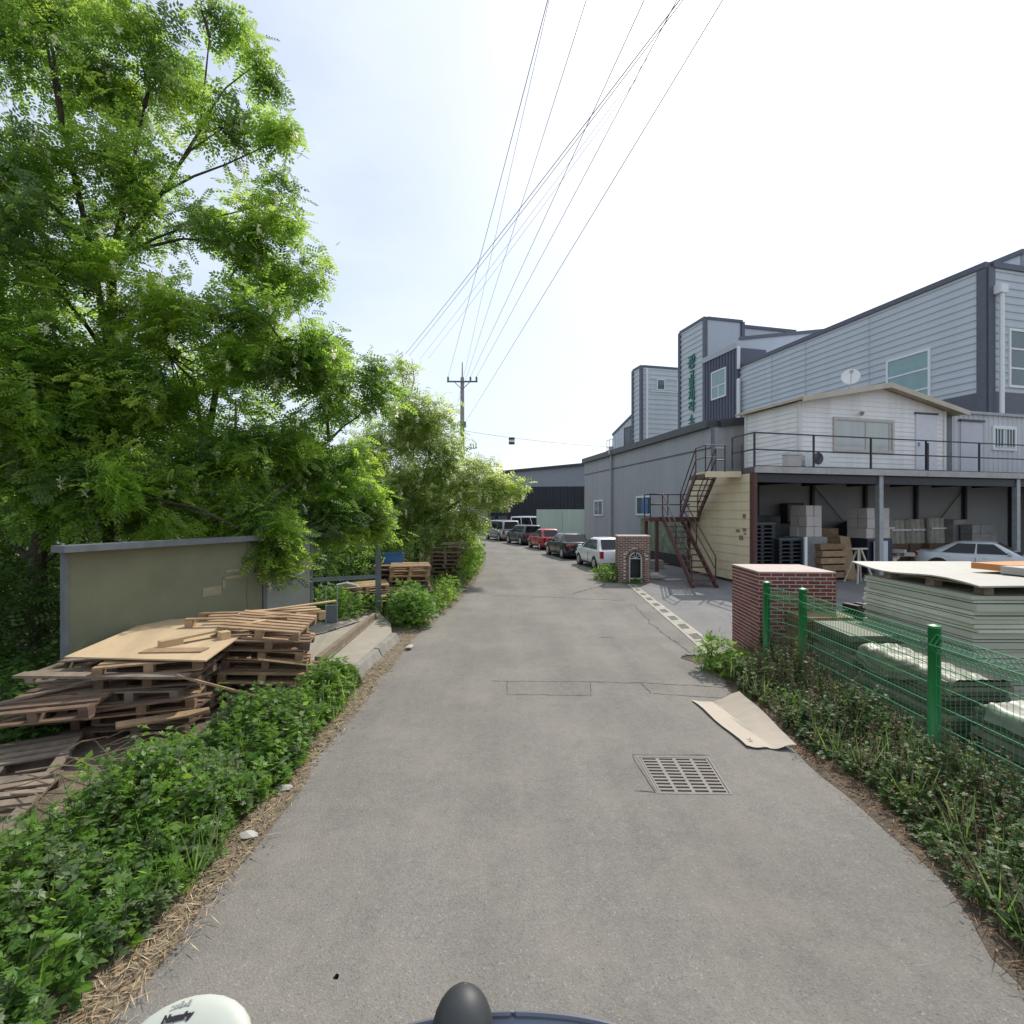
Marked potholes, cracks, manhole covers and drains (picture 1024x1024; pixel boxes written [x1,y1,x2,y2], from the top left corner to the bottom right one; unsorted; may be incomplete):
drain grate [637,756,733,795]
